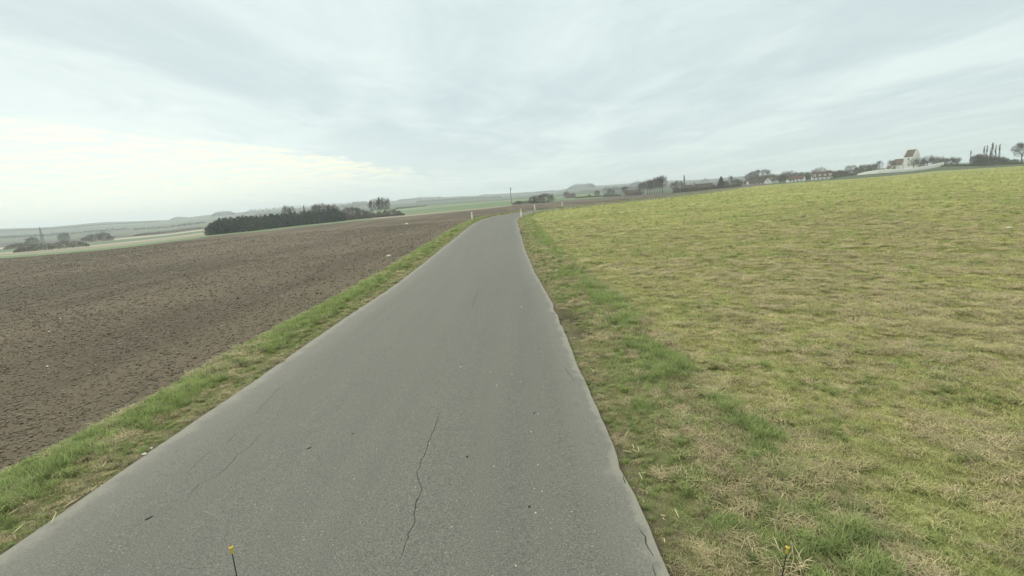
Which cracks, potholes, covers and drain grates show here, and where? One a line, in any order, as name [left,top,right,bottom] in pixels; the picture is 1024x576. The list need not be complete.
crack [397,415,439,567]
